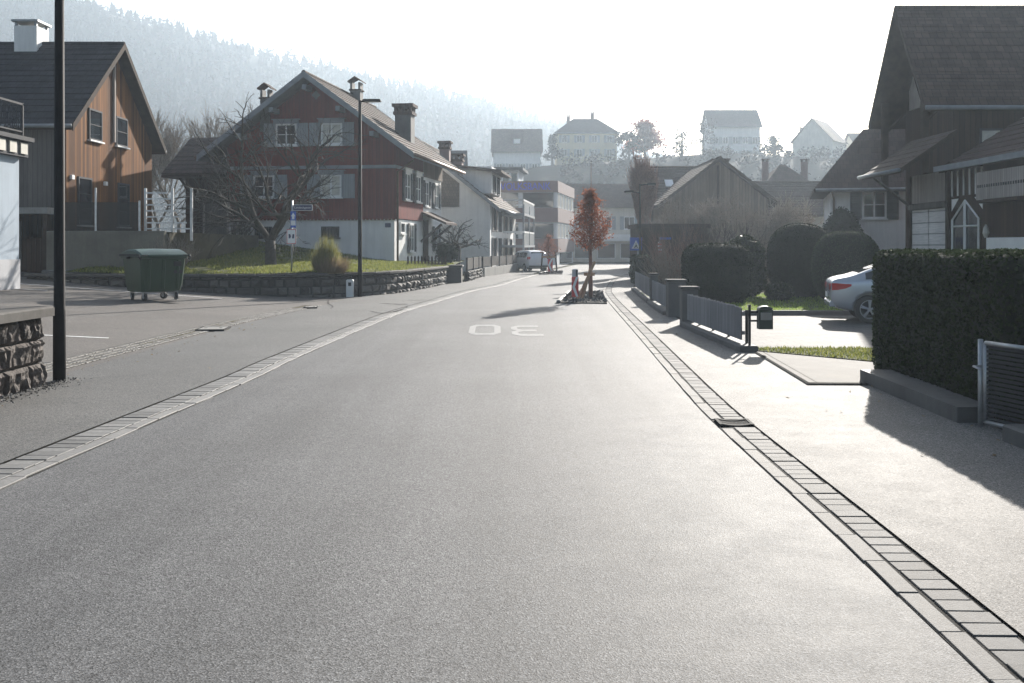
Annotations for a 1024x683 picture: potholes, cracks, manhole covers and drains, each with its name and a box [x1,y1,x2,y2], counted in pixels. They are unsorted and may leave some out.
drain grate [714,418,755,427]
